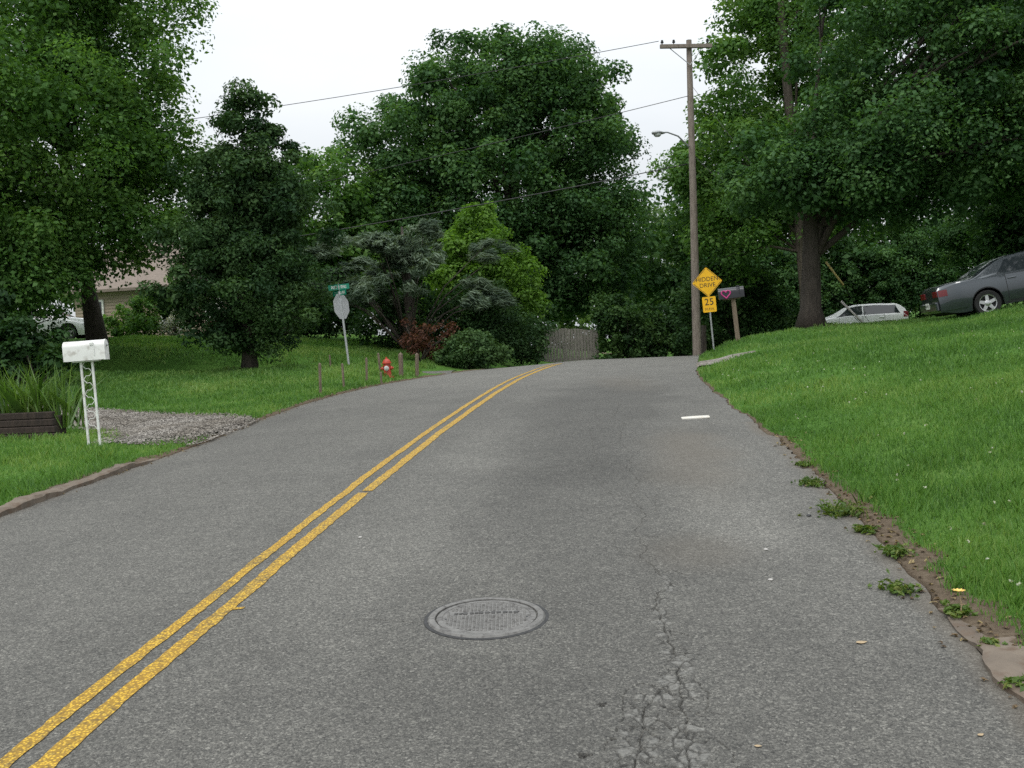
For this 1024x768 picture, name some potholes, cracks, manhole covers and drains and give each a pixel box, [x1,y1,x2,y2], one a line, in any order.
manhole cover [424,597,549,640]
crack [411,405,753,768]
